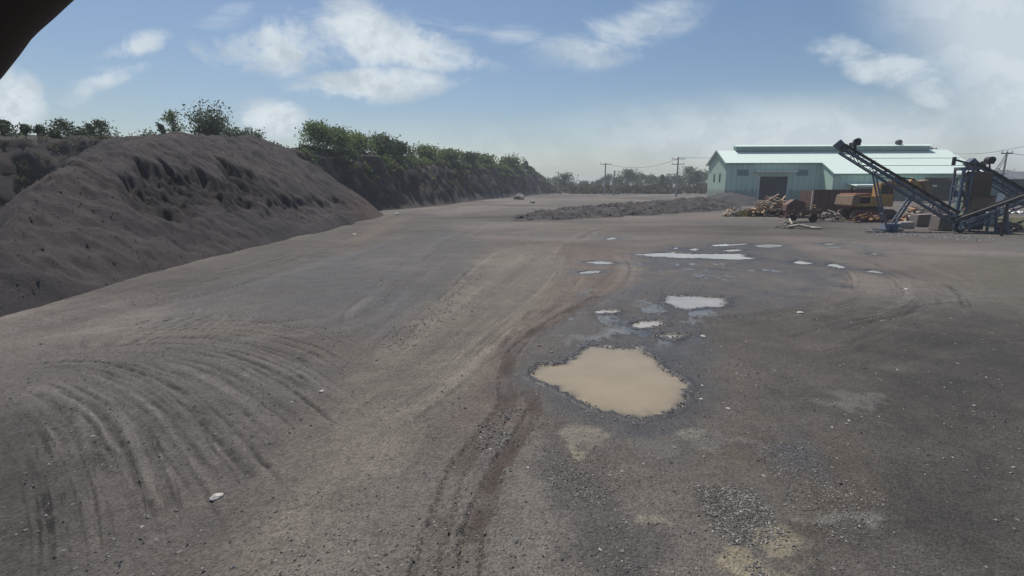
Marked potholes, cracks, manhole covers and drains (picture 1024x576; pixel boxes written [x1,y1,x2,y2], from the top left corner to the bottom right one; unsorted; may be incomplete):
pothole [818,262,852,270]
pothole [625,252,767,261]
pothole [623,318,675,330]
pothole [522,343,700,424]
pothole [650,331,694,341]
pothole [655,293,736,311]
